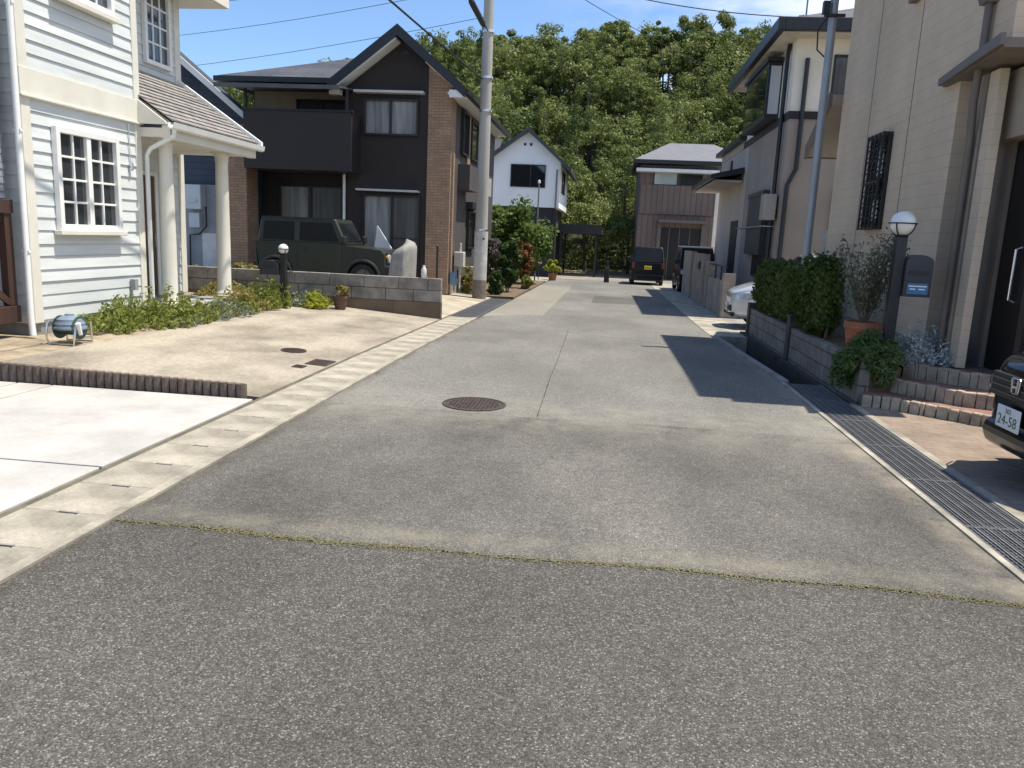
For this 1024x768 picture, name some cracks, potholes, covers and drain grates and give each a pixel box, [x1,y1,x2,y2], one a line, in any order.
drain grate [964,526,1024,574]
drain grate [905,478,1024,531]
utility cover [305,359,336,367]
manhole cover [442,397,506,411]
drain grate [831,419,912,448]
drain grate [786,383,844,401]
drain grate [806,399,874,422]
drain grate [862,444,963,483]
